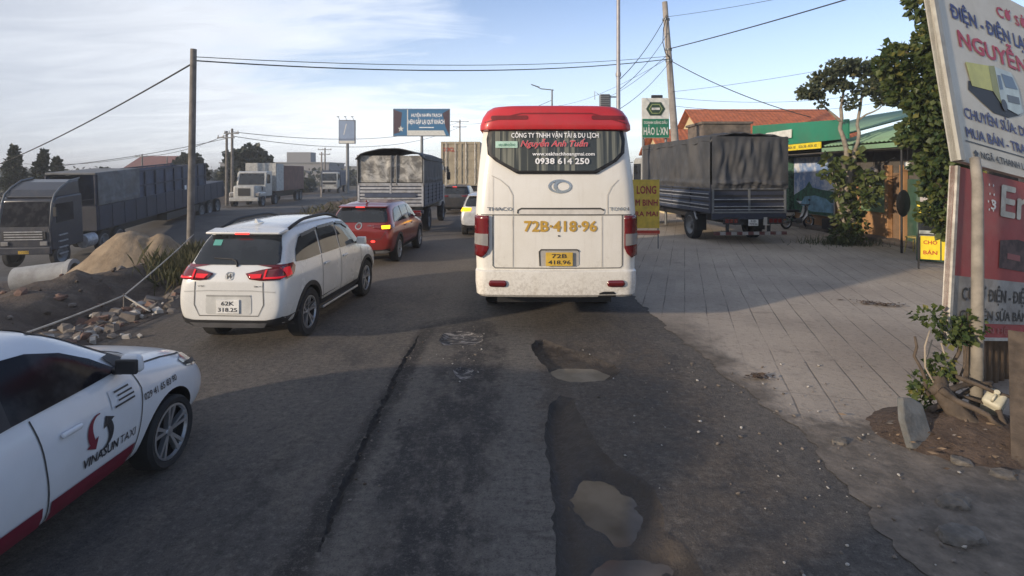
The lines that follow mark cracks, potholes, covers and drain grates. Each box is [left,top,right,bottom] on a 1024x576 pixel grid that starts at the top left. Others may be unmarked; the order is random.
pothole [531,339,620,381]
crack [317,334,420,552]
pothole [544,396,705,576]
